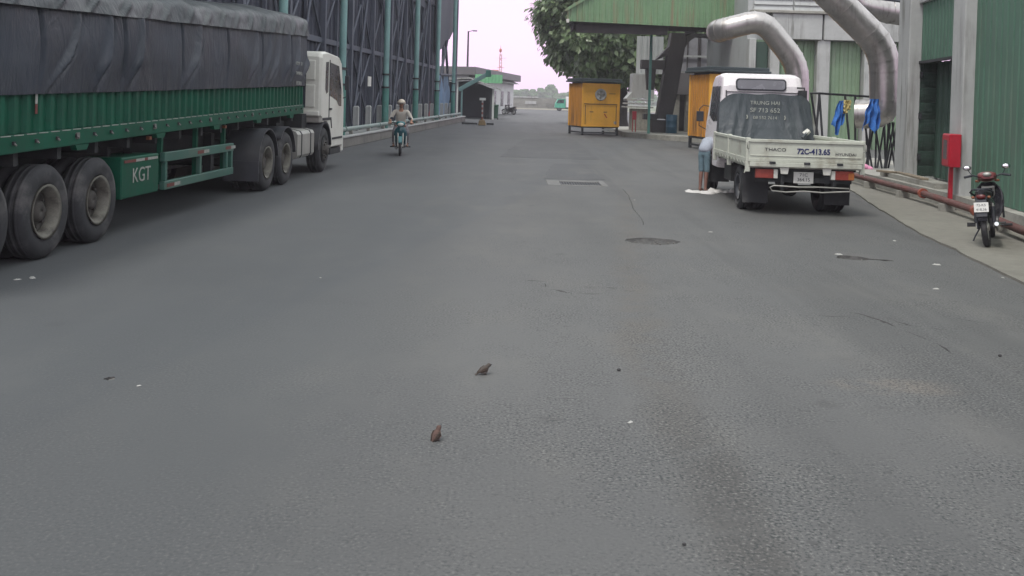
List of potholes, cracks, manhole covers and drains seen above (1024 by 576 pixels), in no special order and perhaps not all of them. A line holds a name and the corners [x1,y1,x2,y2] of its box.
crack [817,312,977,353]
